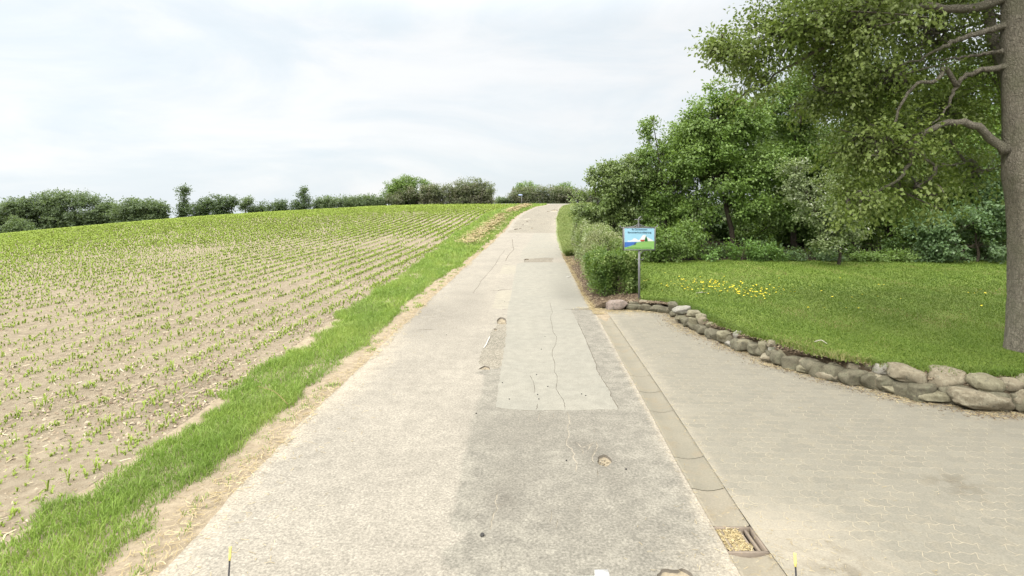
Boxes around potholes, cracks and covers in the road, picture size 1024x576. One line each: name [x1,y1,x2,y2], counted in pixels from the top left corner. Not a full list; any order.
crack [475,494,503,530]
drain grate [713,526,771,558]
pothole [597,455,612,466]
crack [530,305,598,475]
pothole [657,568,693,576]
